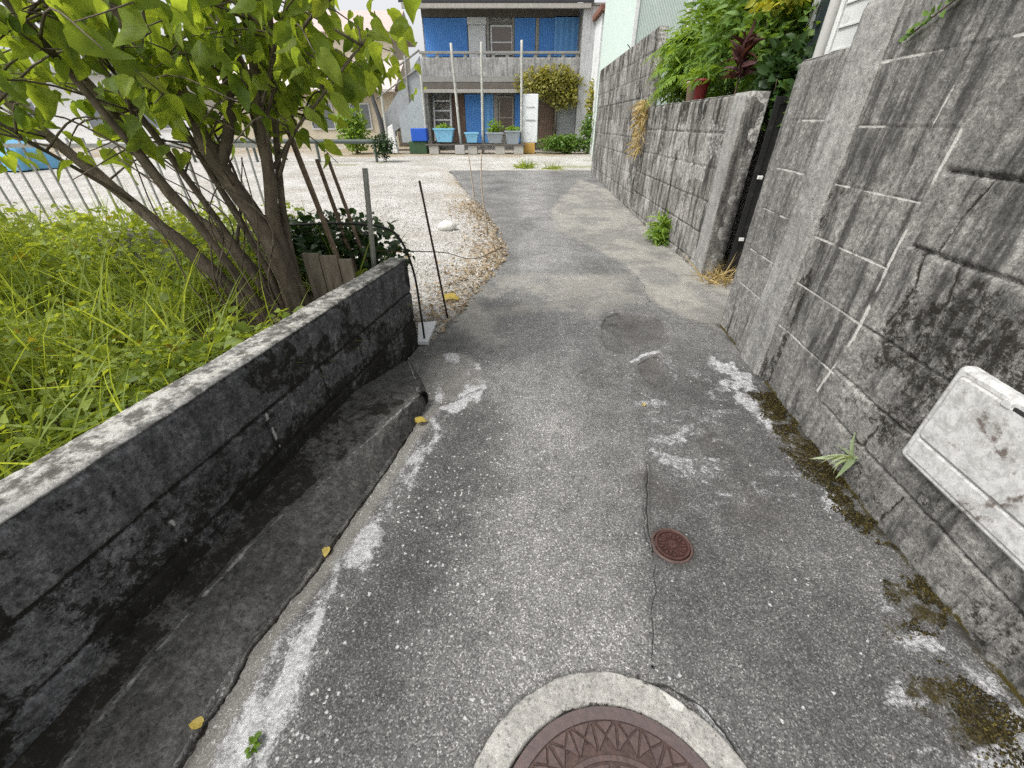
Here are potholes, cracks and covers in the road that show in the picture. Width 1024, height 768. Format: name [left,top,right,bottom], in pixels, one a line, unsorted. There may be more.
utility cover [650,528,694,564]
crack [640,464,749,768]
manhole cover [474,671,747,768]
